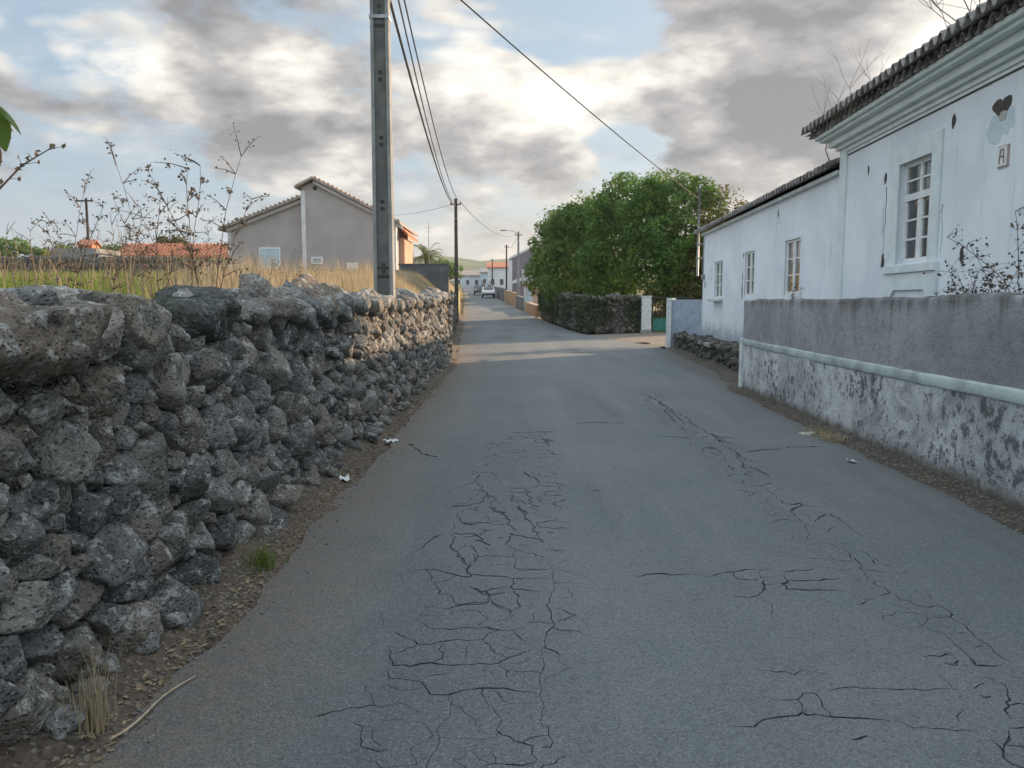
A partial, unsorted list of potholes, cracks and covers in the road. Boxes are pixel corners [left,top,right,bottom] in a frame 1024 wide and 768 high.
crack [645,396,1024,768]
crack [315,432,581,768]
